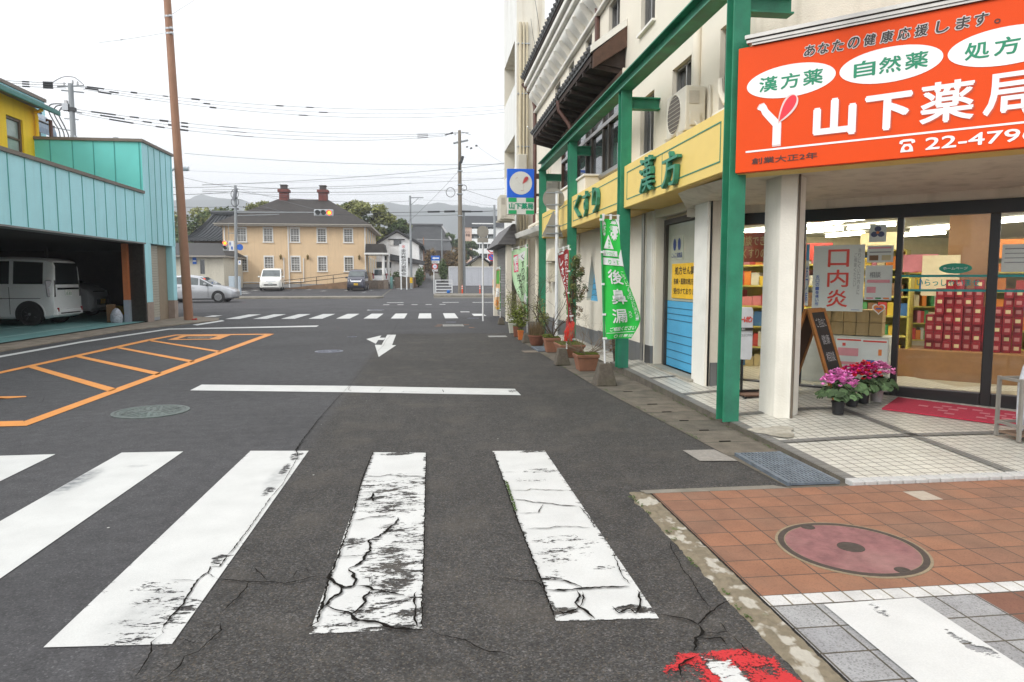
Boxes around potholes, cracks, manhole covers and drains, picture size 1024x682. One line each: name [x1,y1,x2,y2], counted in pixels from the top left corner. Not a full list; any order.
crack [663,542,756,677]
manhole cover [775,522,934,579]
manhole cover [110,405,190,419]
crack [138,452,510,678]
drain grate [734,451,840,486]
